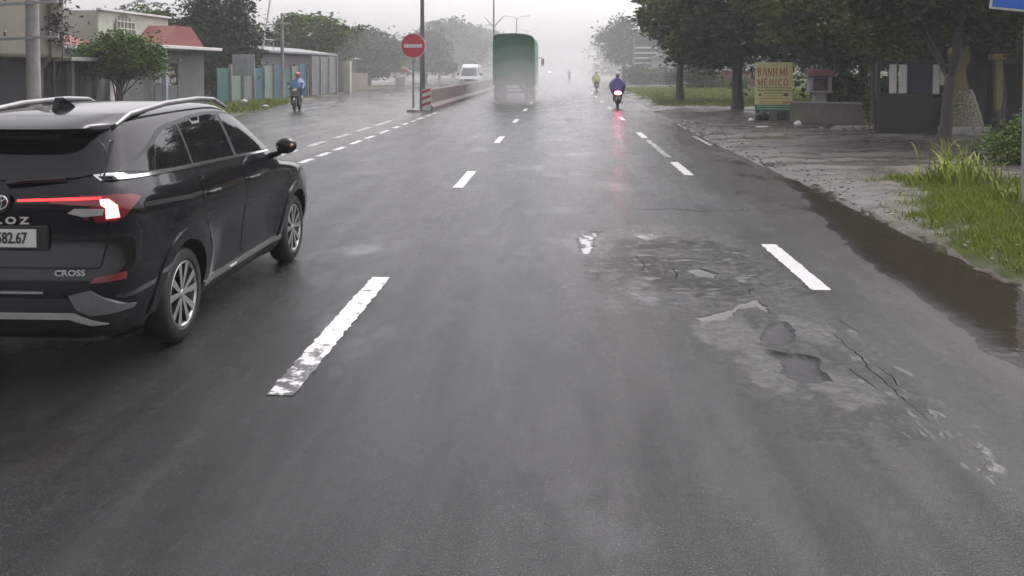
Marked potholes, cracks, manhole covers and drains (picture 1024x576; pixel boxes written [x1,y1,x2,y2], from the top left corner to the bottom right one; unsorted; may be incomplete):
pothole [575,231,602,255]
pothole [762,349,834,384]
crack [634,241,753,294]
crack [834,319,932,423]
pothole [693,299,771,321]
pothole [759,321,796,346]
